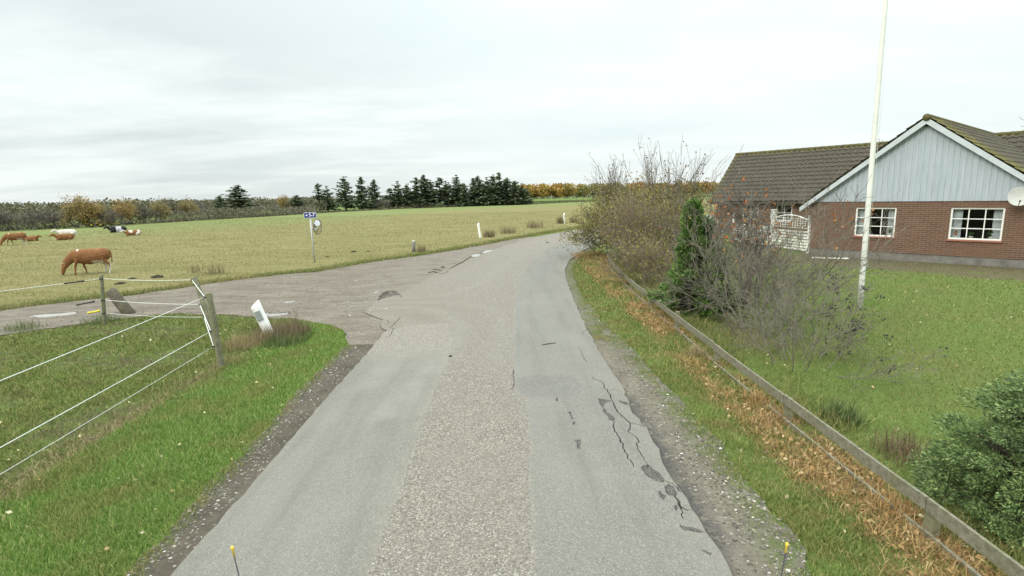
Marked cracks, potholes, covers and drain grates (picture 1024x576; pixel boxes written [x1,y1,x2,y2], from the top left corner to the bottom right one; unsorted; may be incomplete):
pothole [664,483,677,497]
pothole [641,464,665,483]
crack [580,329,690,519]
pothole [378,290,399,300]
